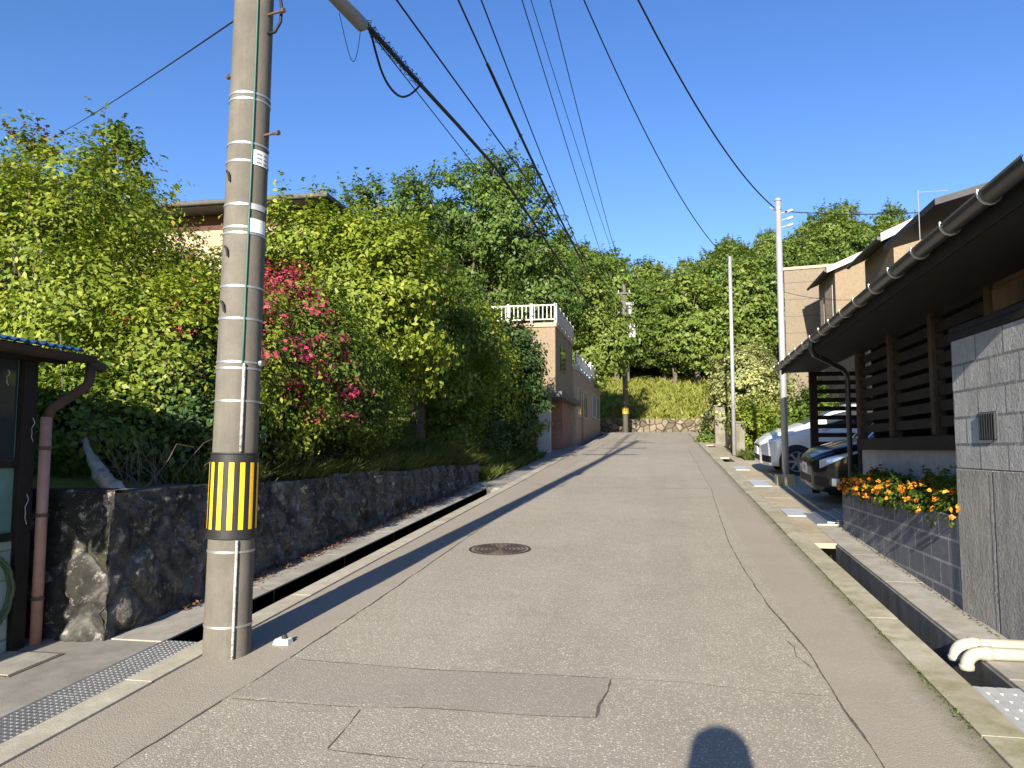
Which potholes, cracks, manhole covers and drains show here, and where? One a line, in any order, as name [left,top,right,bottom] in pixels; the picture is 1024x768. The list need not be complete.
manhole cover [469,543,531,555]
